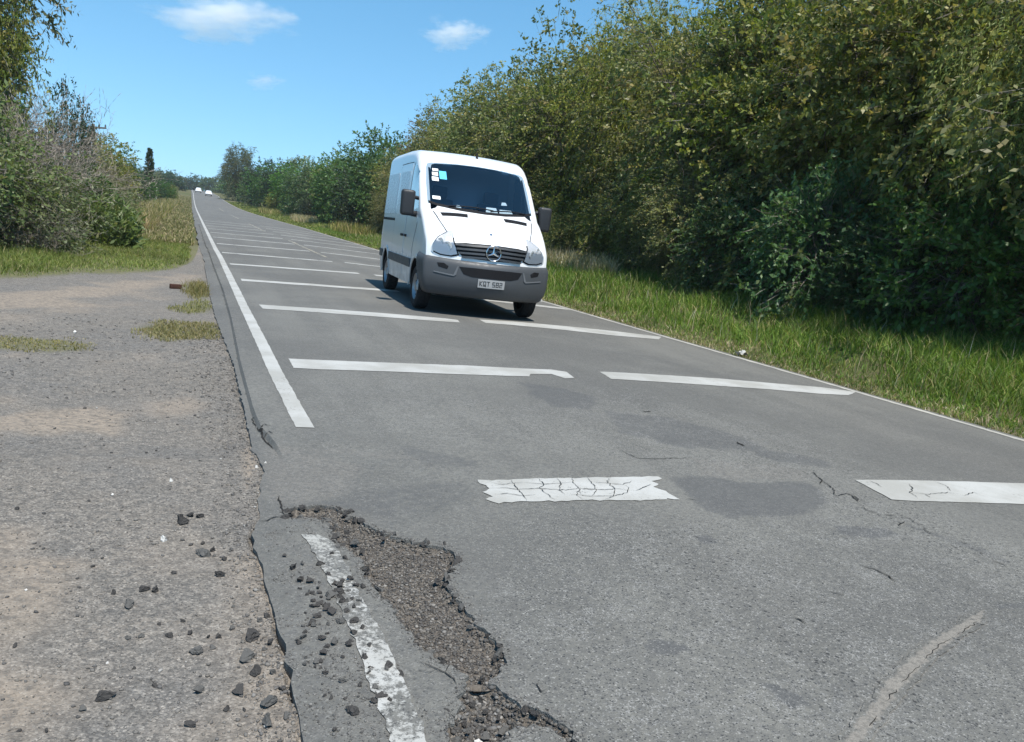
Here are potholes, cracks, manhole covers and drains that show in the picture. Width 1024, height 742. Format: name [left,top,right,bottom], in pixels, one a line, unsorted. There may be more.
pothole [290,508,506,695]
pothole [447,685,573,742]
crack [830,565,986,742]
crack [814,473,1005,565]
crack [252,417,272,447]
